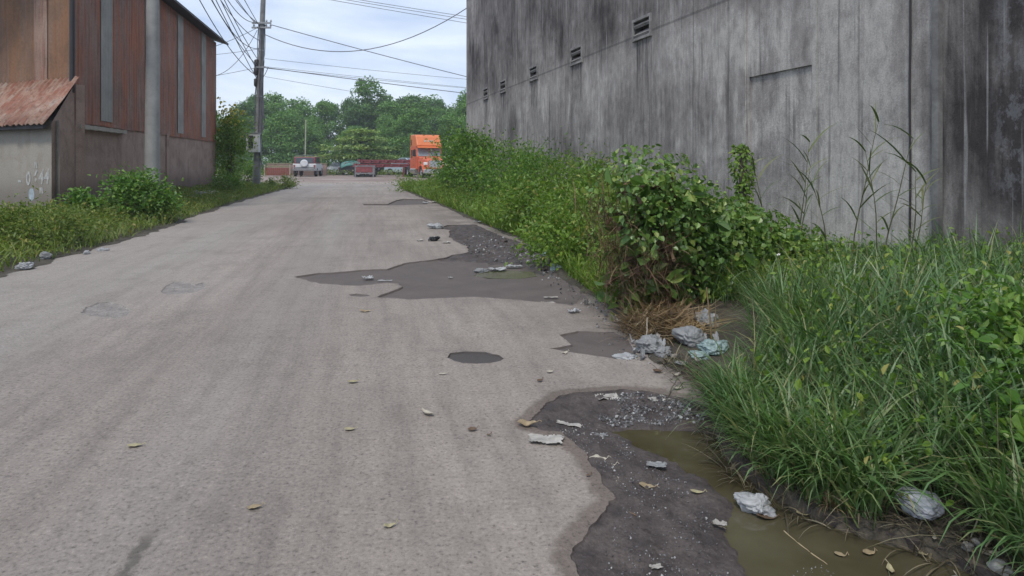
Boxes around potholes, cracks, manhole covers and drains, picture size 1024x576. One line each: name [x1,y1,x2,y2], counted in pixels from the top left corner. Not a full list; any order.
pothole [529,389,1000,576]
